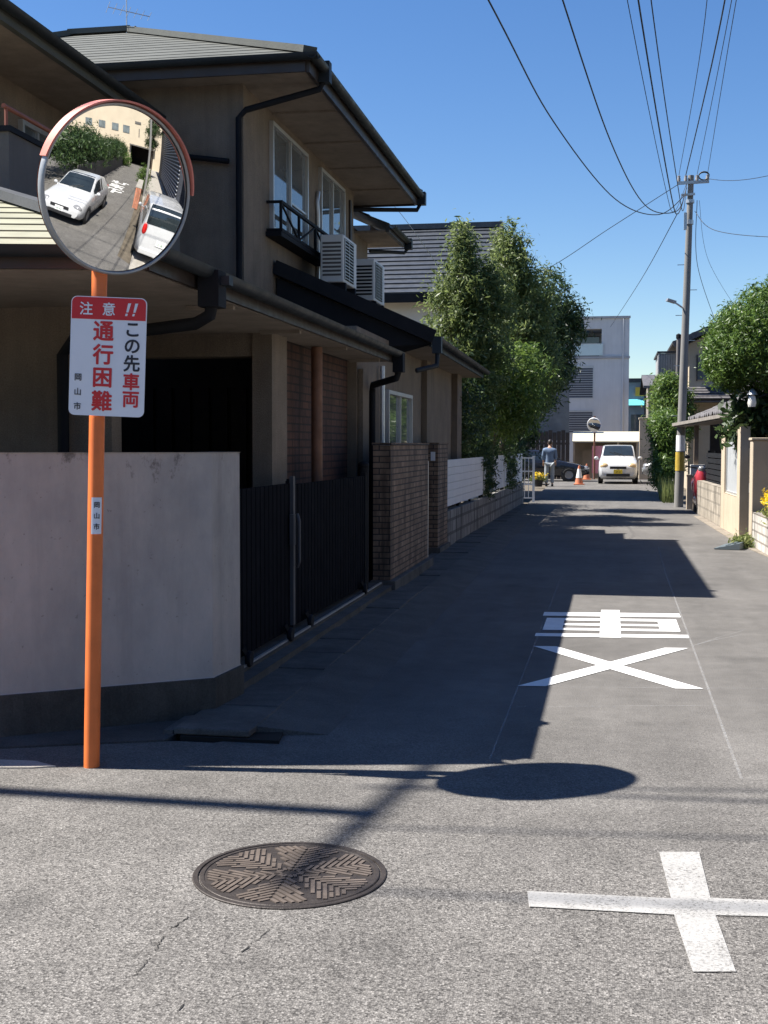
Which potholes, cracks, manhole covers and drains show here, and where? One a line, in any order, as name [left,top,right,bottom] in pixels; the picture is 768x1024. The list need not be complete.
crack [131,916,188,978]
manhole cover [192,842,387,910]
